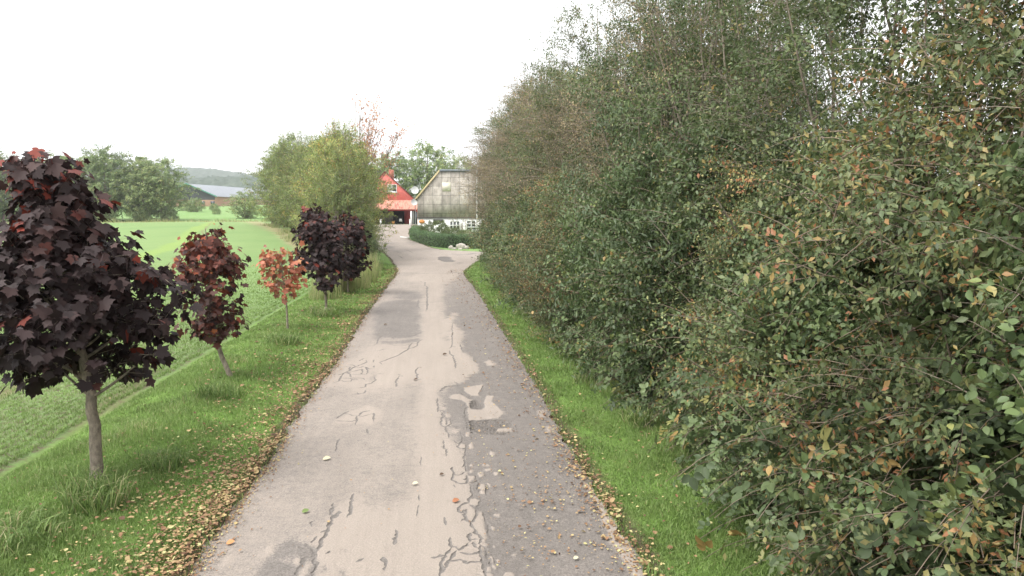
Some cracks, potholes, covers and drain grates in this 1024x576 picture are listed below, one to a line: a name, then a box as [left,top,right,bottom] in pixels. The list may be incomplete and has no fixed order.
crack [416,325,497,576]
crack [294,493,398,576]
crack [334,332,423,452]
